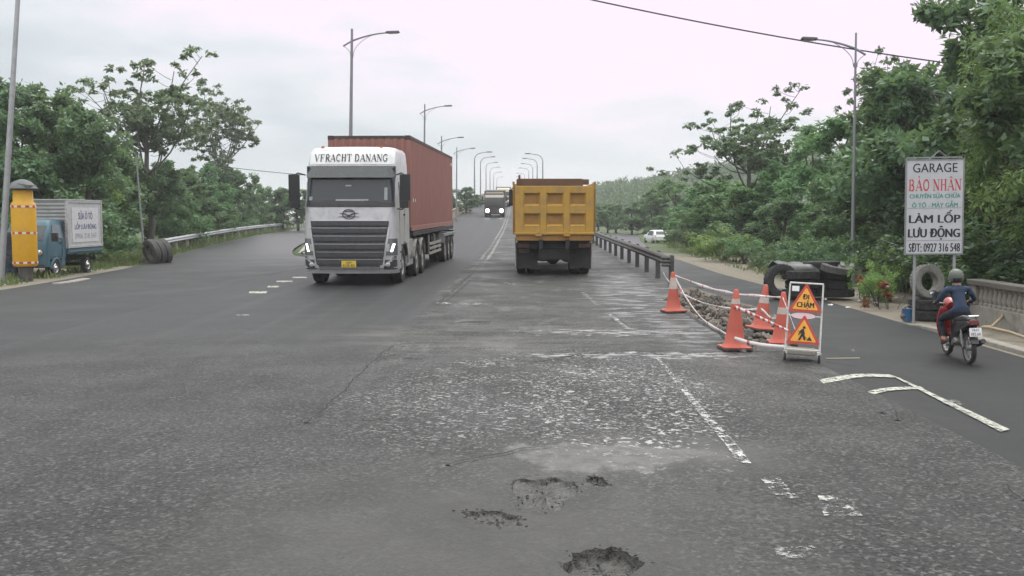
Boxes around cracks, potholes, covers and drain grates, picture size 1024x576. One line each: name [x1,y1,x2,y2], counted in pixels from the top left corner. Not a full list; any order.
crack [439,274,473,302]
pothole [574,473,620,491]
crack [445,445,552,466]
pothole [497,474,593,515]
pothole [545,541,664,576]
pothole [446,506,536,533]
